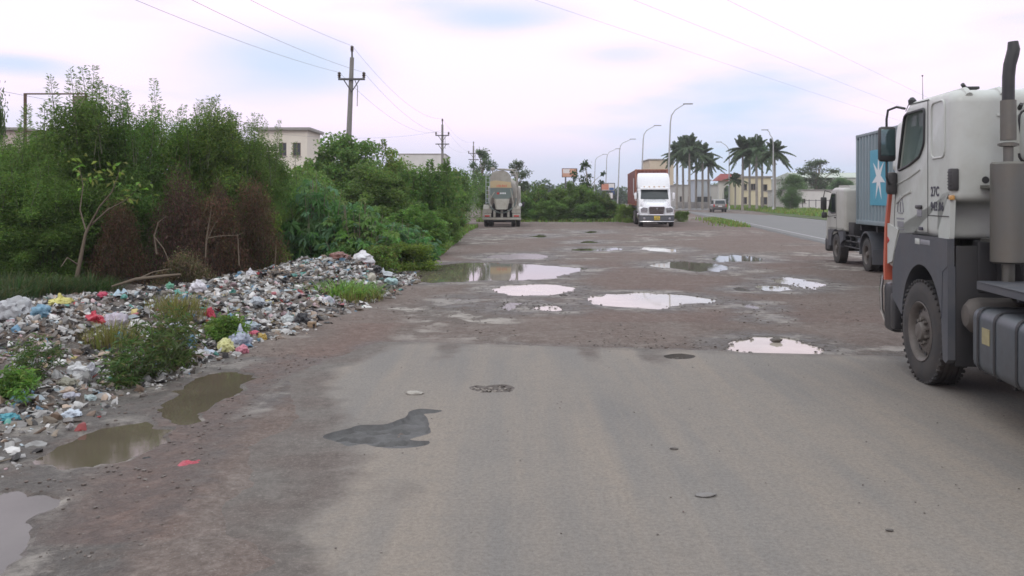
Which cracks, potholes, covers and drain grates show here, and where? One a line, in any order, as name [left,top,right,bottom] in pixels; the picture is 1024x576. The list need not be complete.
pothole [708,254,768,262]
pothole [469,384,515,393]
pothole [489,284,577,297]
pothole [724,335,826,354]
pothole [587,291,723,309]
pothole [0,487,69,576]
pothole [646,261,735,272]
pothole [155,366,265,425]
pothole [770,276,829,290]
pothole [750,284,796,292]
pothole [29,414,176,470]
pothole [412,262,589,283]
